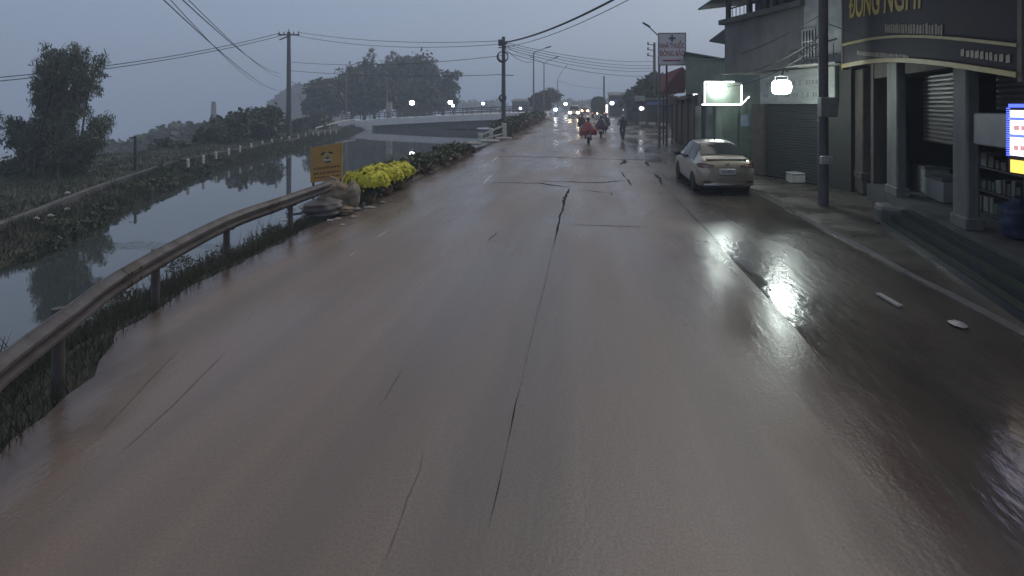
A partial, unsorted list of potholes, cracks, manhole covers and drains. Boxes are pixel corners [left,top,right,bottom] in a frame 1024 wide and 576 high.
crack [490,156,662,519]
crack [100,352,222,443]
crack [381,452,423,569]
